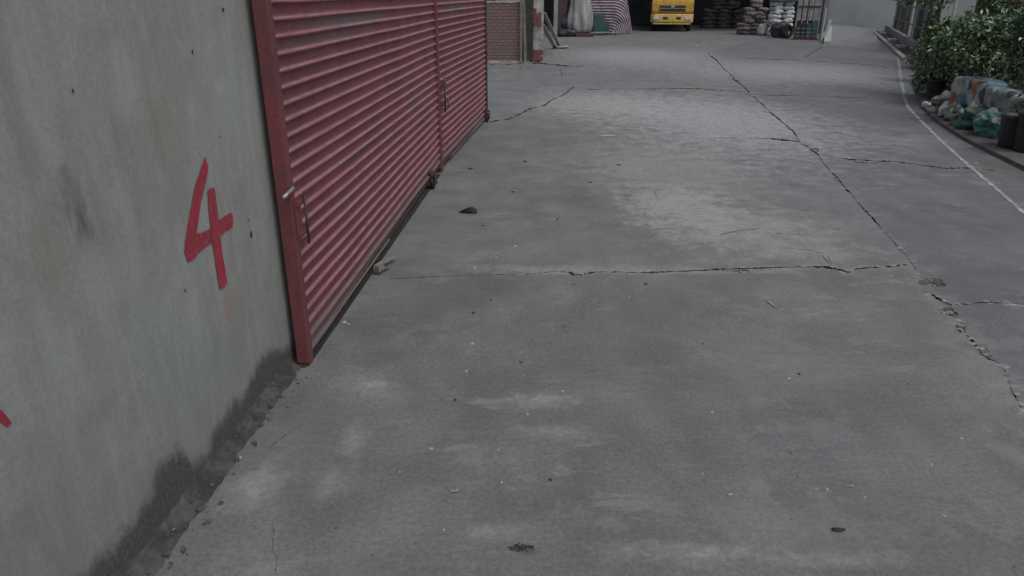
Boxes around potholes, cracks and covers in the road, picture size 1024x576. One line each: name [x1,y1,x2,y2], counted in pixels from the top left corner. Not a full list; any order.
pothole [941,308,958,316]
pothole [918,278,946,287]
crack [843,158,994,171]
crack [489,62,580,123]
crack [523,228,906,276]
crack [708,53,802,144]
crack [923,291,1024,415]
